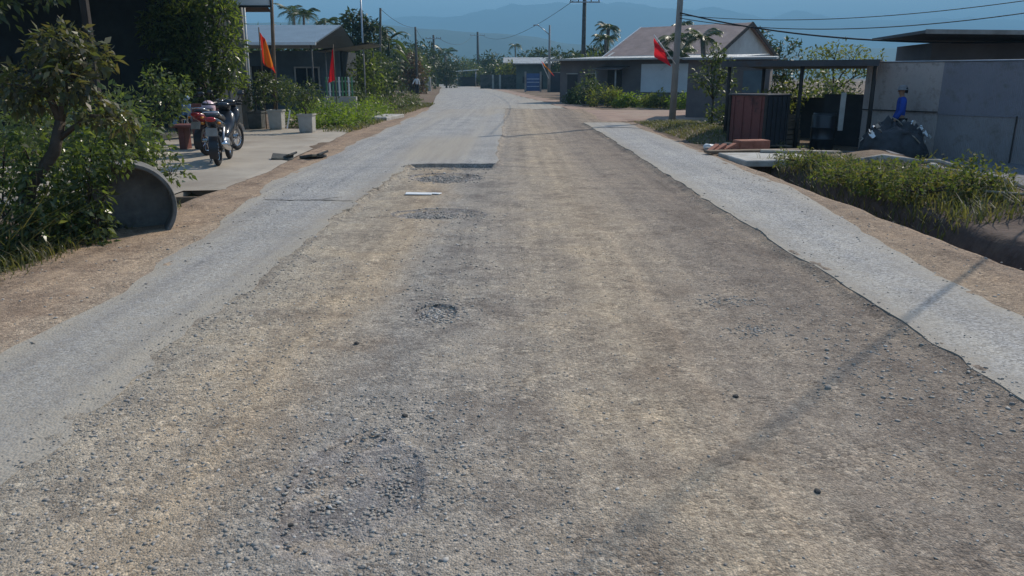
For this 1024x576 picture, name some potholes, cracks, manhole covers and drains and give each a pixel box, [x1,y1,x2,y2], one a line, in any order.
pothole [397,172,488,185]
pothole [381,207,496,221]
pothole [407,302,462,325]
pothole [255,420,441,576]
